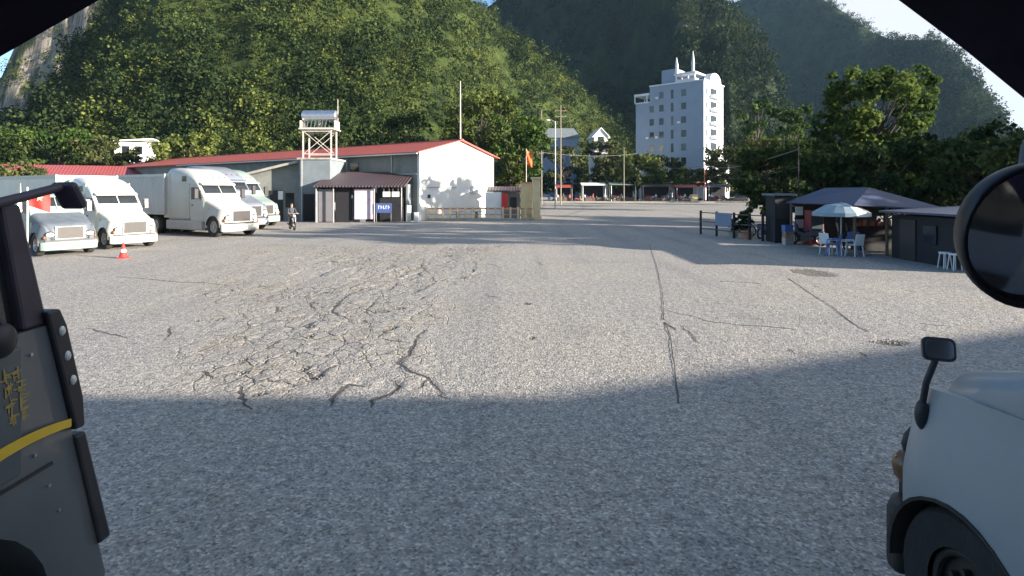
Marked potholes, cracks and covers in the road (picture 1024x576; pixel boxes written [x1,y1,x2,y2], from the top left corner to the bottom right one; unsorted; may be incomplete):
crack [304,282,446,408]
crack [665,309,787,343]
crack [239,368,268,409]
